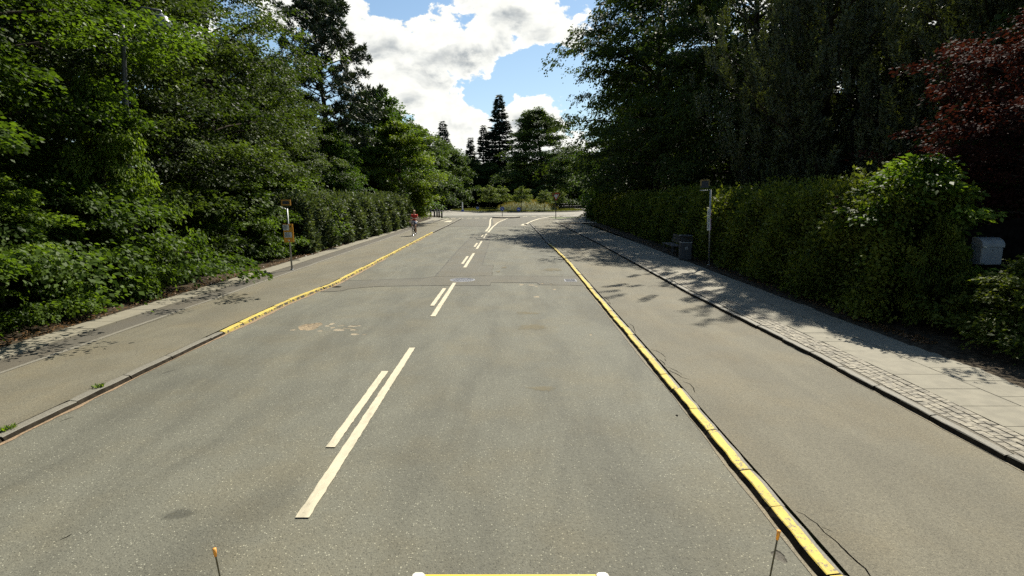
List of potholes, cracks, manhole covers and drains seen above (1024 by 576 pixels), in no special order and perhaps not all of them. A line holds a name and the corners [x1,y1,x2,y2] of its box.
crack [799,512,871,576]
